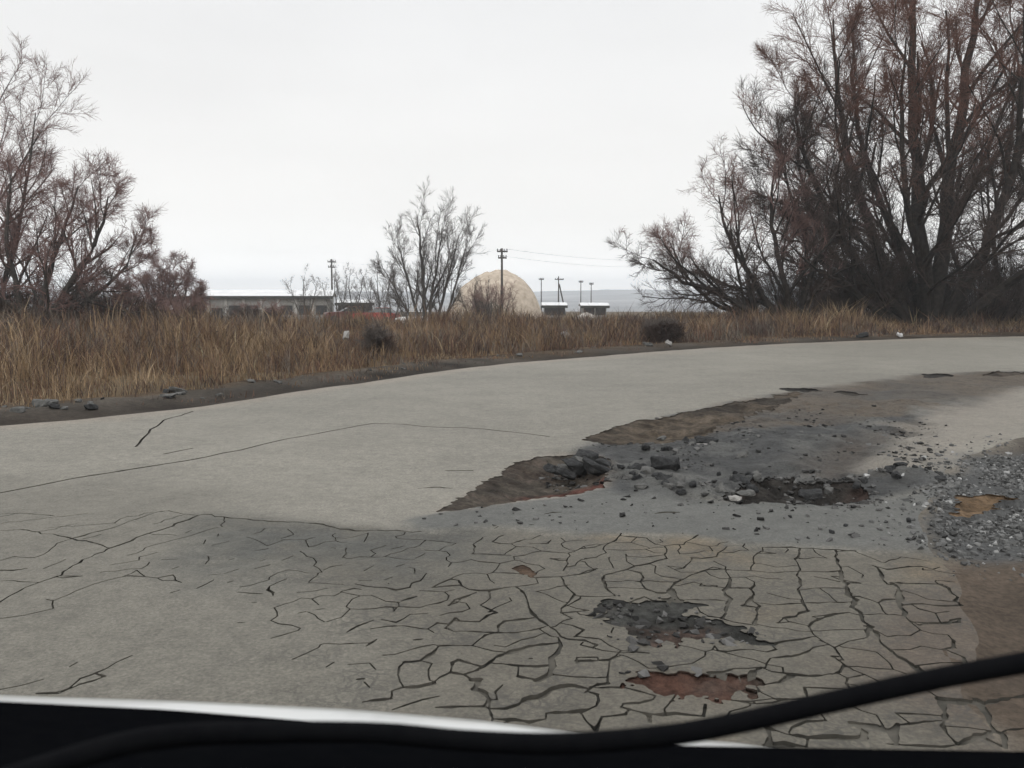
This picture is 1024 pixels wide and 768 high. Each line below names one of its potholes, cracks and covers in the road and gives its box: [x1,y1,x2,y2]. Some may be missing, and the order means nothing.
pothole [436,455,612,512]
pothole [620,671,765,704]
crack [2,512,1024,749]
pothole [597,599,776,650]
pothole [948,494,1019,518]
pothole [512,565,537,578]
crack [1,423,550,493]
pothole [723,476,871,506]
crack [135,411,193,447]
